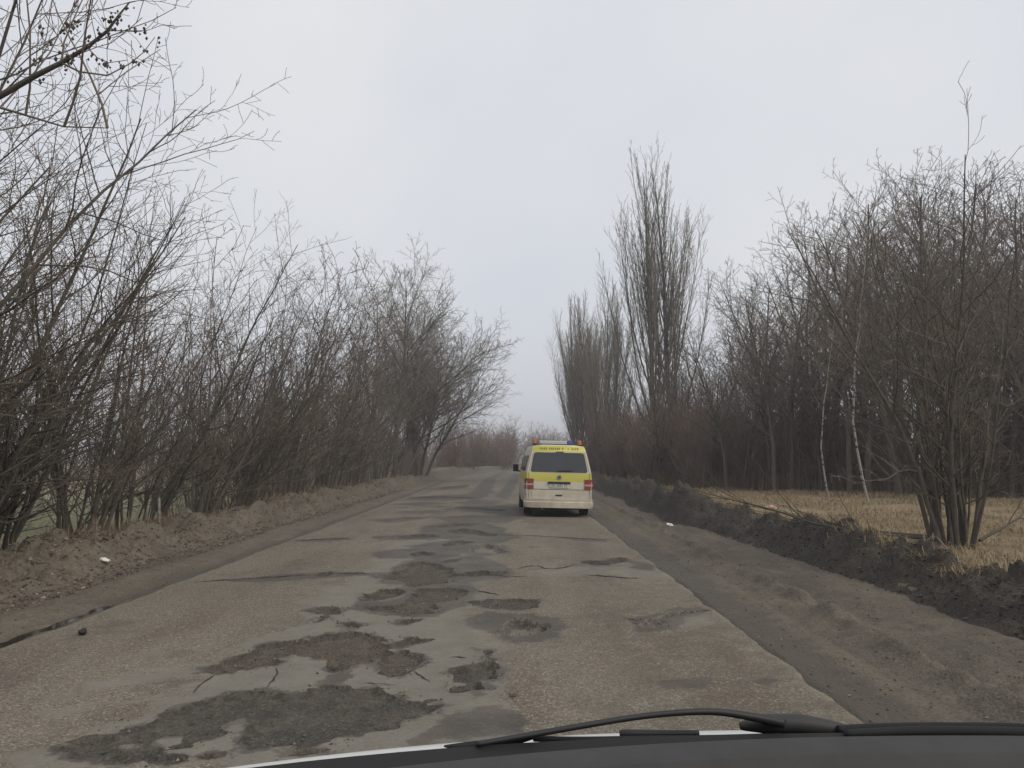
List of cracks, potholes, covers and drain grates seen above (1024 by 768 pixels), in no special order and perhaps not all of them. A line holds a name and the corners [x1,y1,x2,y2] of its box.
pothole [203,631,436,675]
pothole [448,650,501,693]
pothole [468,599,541,610]
pothole [305,606,341,623]
pothole [362,587,468,615]
pothole [639,610,699,628]
pothole [382,561,458,587]
pothole [50,684,445,765]
pothole [502,618,552,637]
